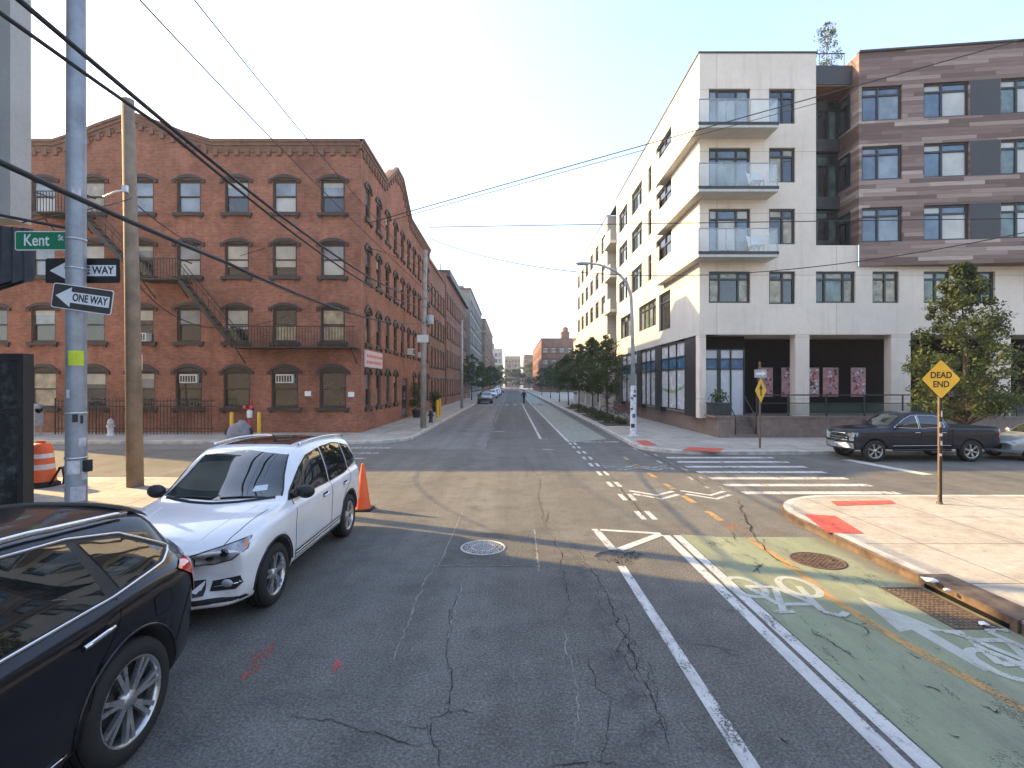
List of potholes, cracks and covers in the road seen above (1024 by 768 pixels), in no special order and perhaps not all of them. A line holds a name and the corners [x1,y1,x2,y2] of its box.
manhole cover [460,540,506,555]
crack [573,544,673,757]
crack [548,654,620,767]
pothole [594,550,644,567]
manhole cover [789,552,848,570]
drain grate [880,574,1024,634]
crack [526,460,577,618]
crack [732,501,794,573]
crack [288,599,473,768]
